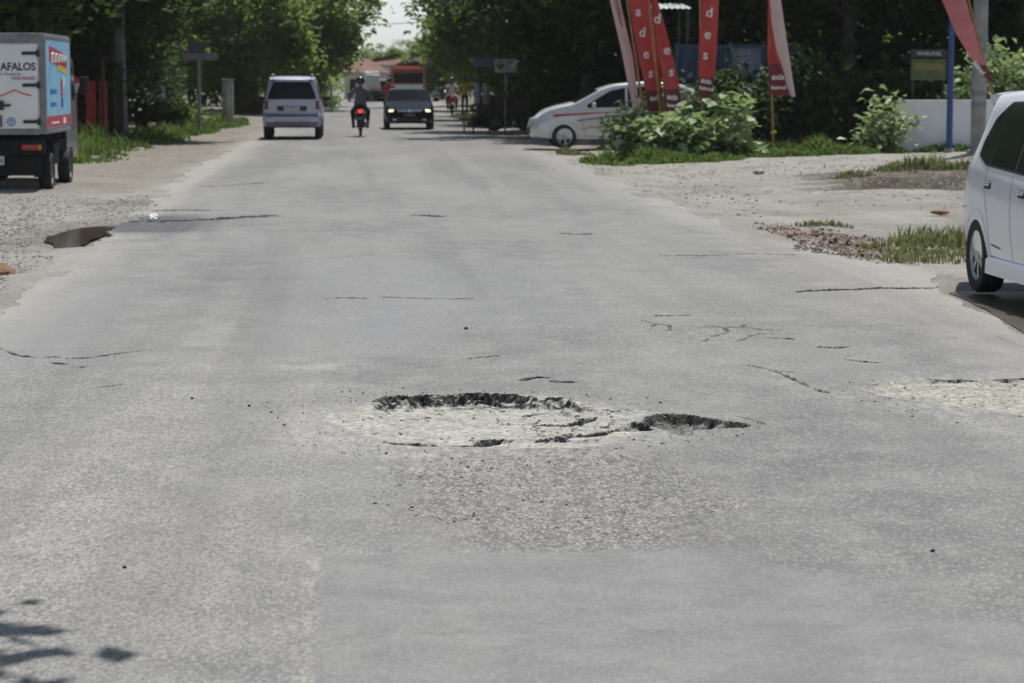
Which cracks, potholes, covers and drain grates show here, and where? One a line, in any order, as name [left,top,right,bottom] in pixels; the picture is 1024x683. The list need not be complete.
pothole [316,392,658,450]
crack [641,315,779,341]
crack [133,209,276,222]
crack [0,348,146,368]
crack [748,365,828,393]
pothole [641,412,752,436]
